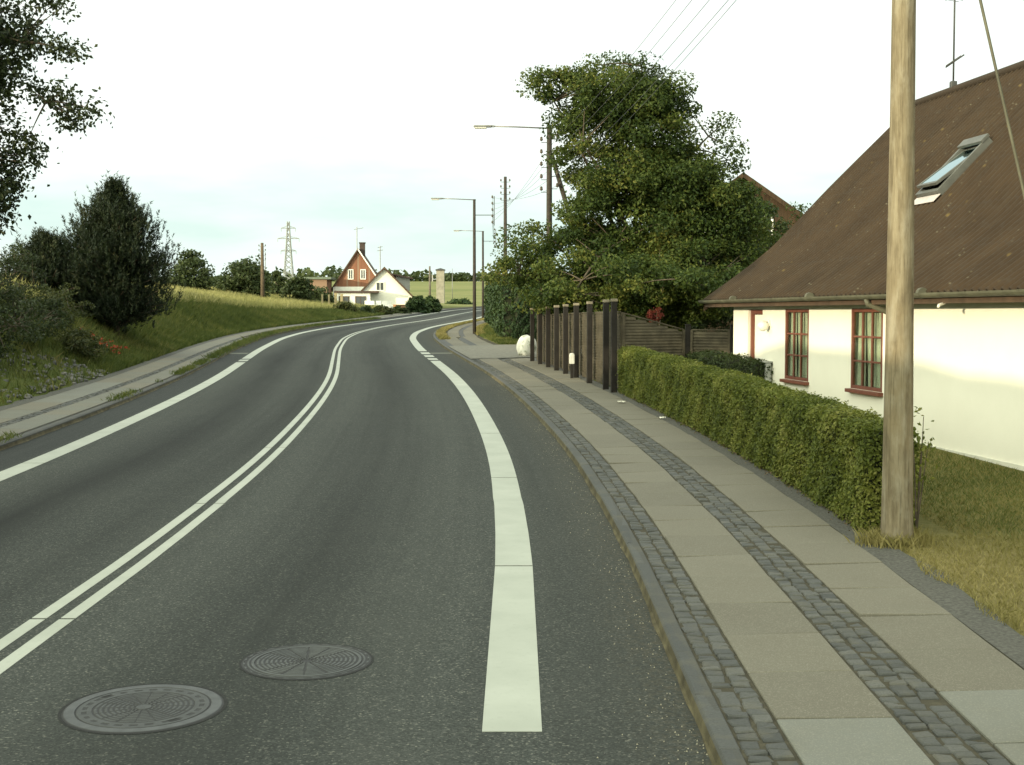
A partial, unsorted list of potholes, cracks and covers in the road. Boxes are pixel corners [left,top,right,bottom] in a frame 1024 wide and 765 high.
manhole cover [239,643,374,680]
manhole cover [57,683,227,735]
